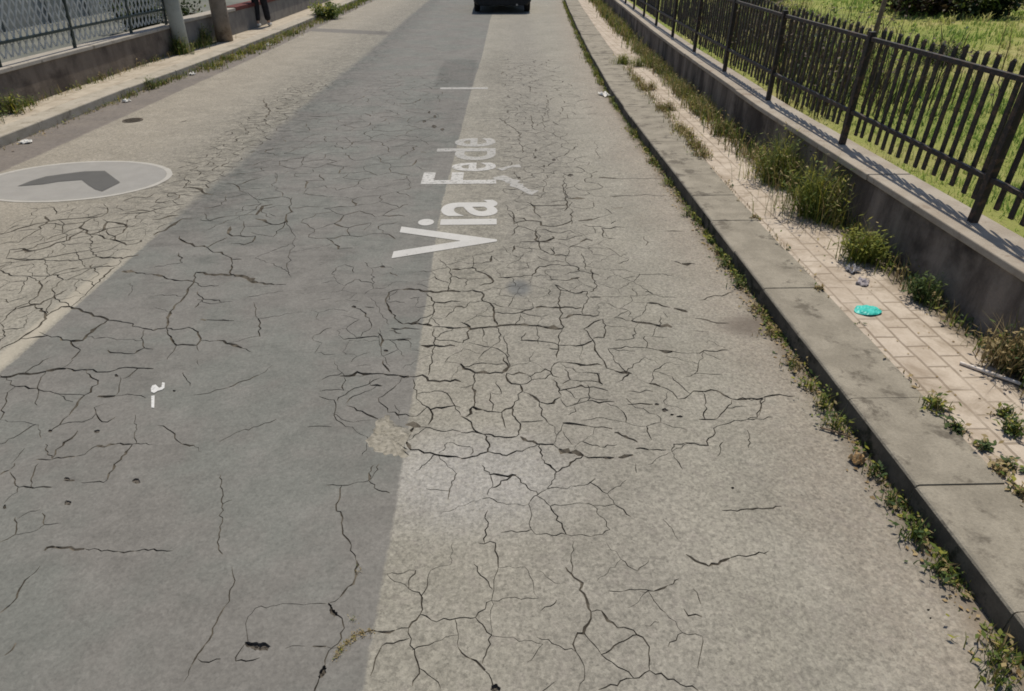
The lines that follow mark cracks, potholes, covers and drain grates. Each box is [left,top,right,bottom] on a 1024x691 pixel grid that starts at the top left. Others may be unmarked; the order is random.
crack [0,73,446,503]
crack [598,177,667,208]
crack [0,509,173,613]
crack [185,475,235,680]
pothole [245,642,270,651]
crack [499,59,625,256]
crack [309,226,793,691]
